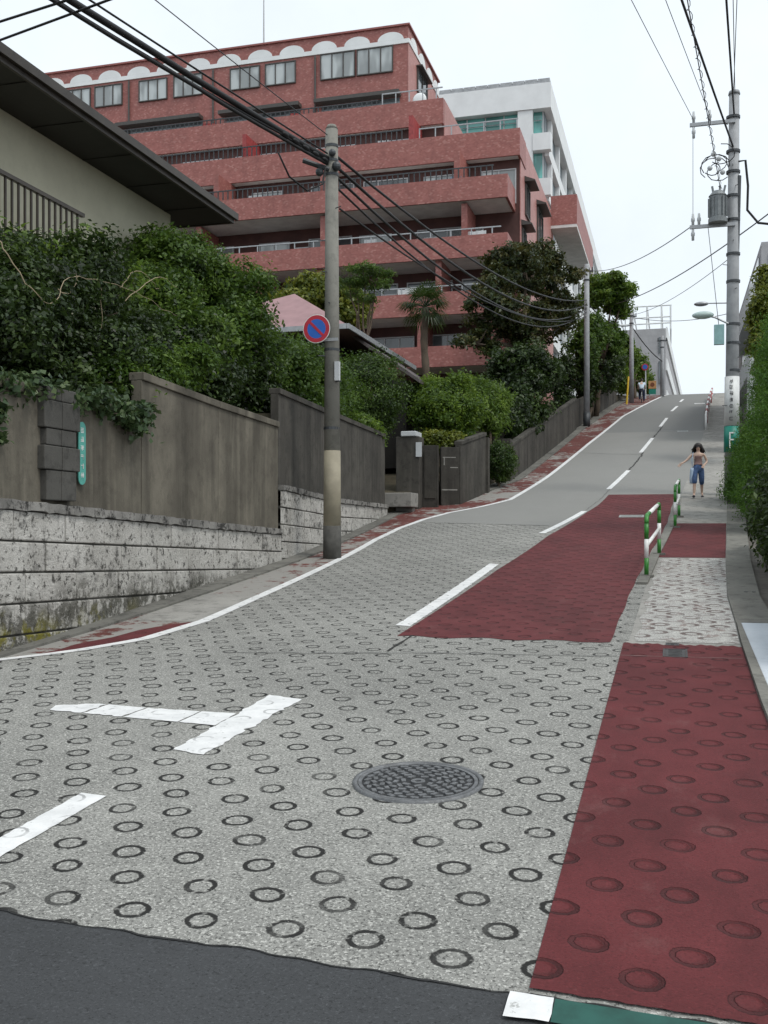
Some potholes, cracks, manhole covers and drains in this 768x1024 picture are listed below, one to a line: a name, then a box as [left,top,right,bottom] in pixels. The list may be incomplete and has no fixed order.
manhole cover [353,761,484,804]
manhole cover [663,648,688,657]
